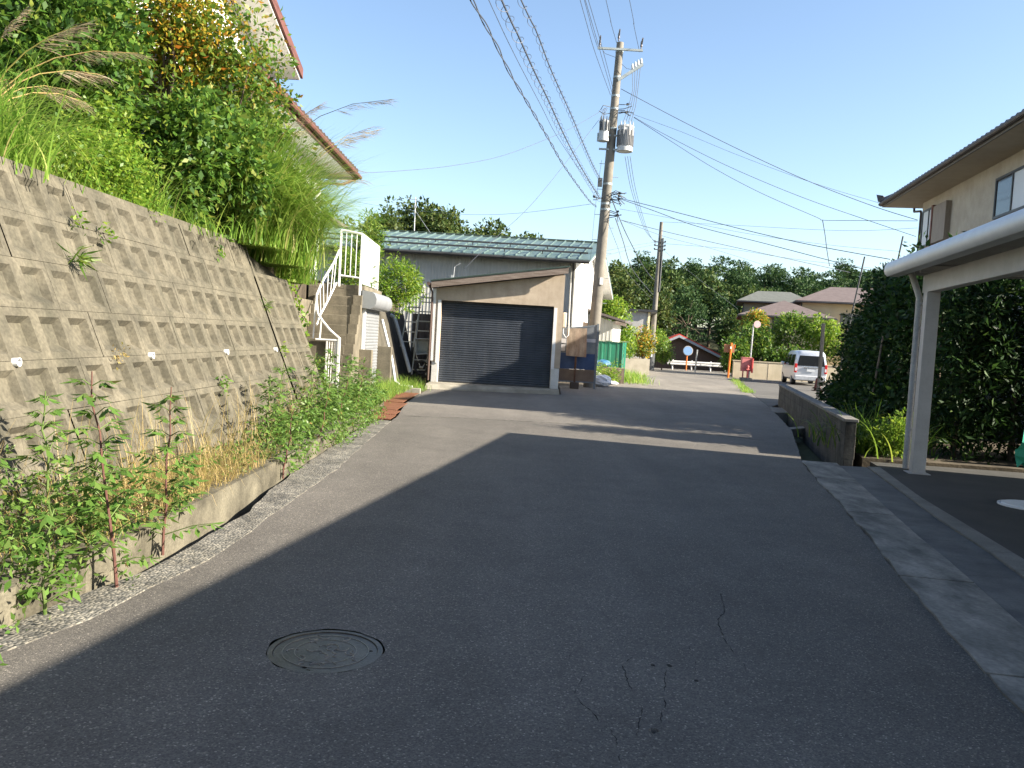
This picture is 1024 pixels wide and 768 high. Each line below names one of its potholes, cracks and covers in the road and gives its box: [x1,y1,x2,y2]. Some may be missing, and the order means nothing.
manhole cover [267,630,383,673]
crack [569,594,747,763]
